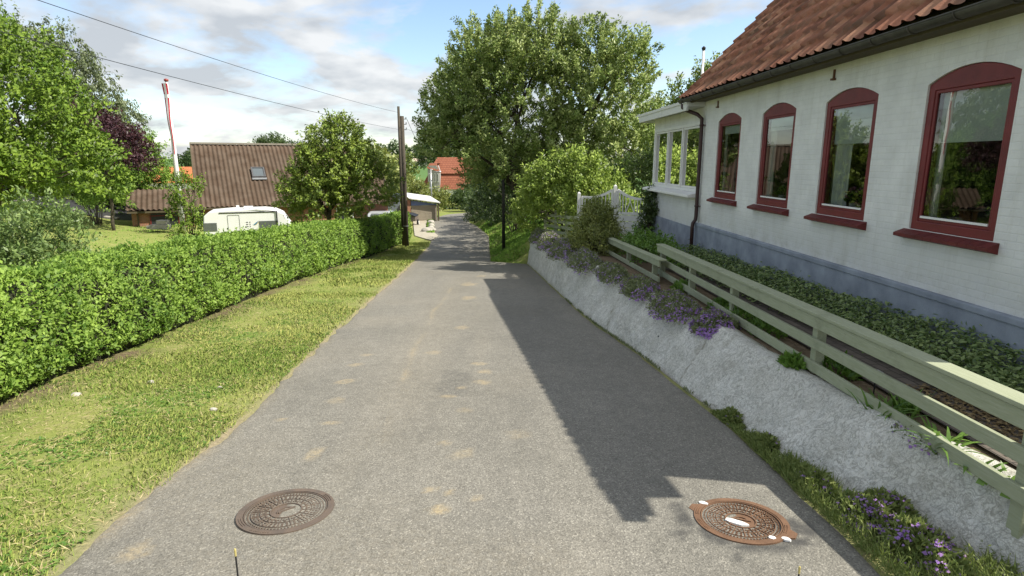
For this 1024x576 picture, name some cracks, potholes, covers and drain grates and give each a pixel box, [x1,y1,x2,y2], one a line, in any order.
manhole cover [236,488,334,535]
manhole cover [689,498,798,546]
